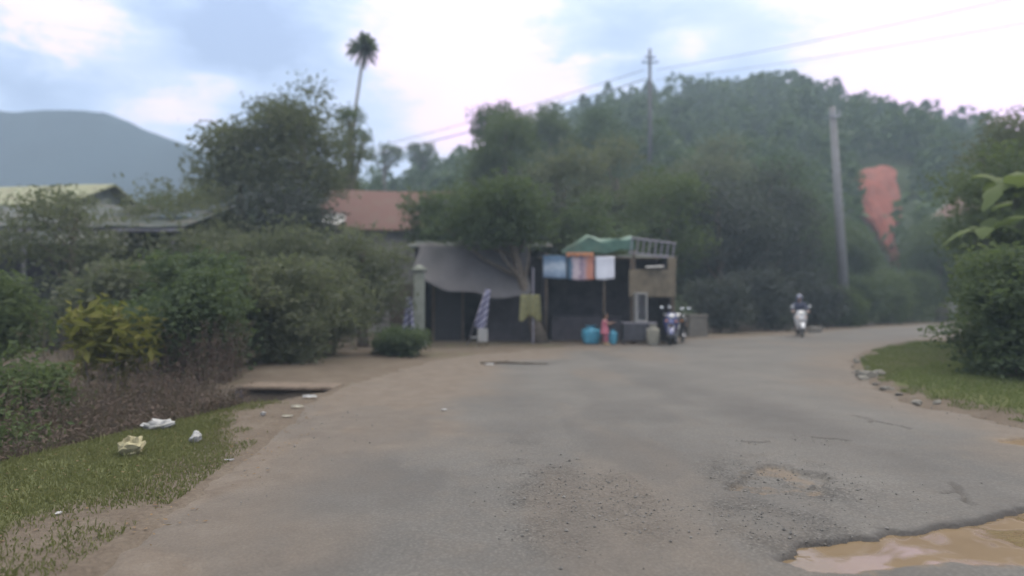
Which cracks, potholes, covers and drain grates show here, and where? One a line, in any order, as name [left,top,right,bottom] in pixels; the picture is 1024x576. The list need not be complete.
pothole [762,501,1024,576]
crack [935,481,984,507]
crack [808,415,918,442]
pothole [716,461,844,499]
